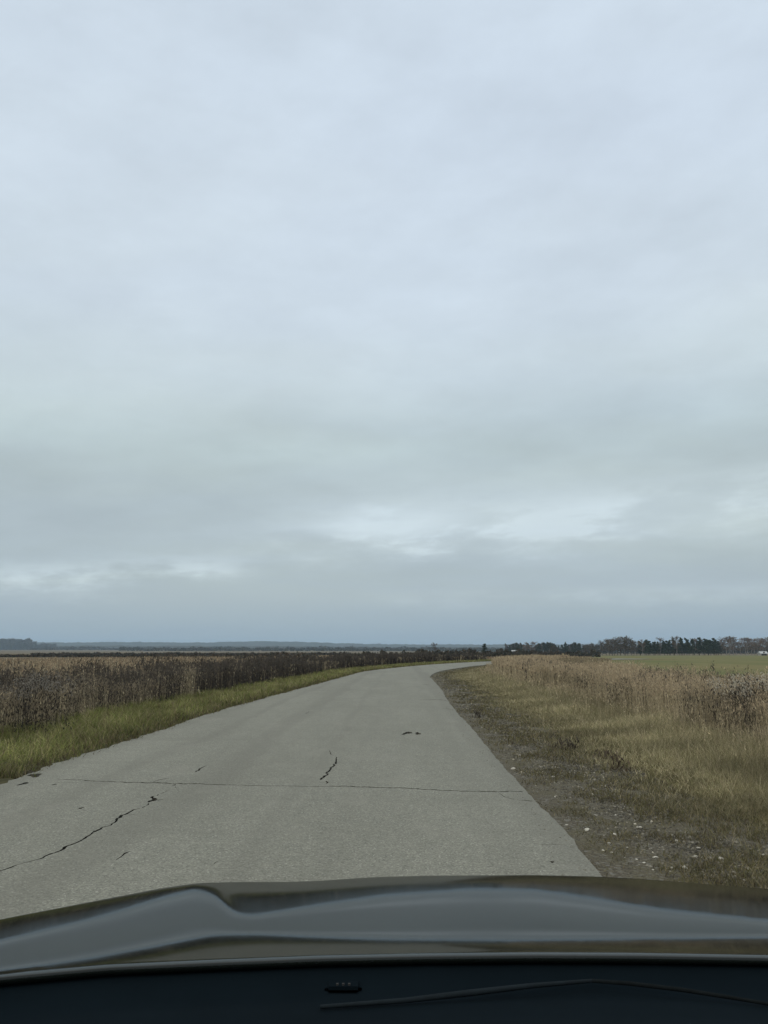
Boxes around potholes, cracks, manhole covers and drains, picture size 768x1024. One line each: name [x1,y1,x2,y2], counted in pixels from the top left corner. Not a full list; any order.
crack [0,750,528,871]
